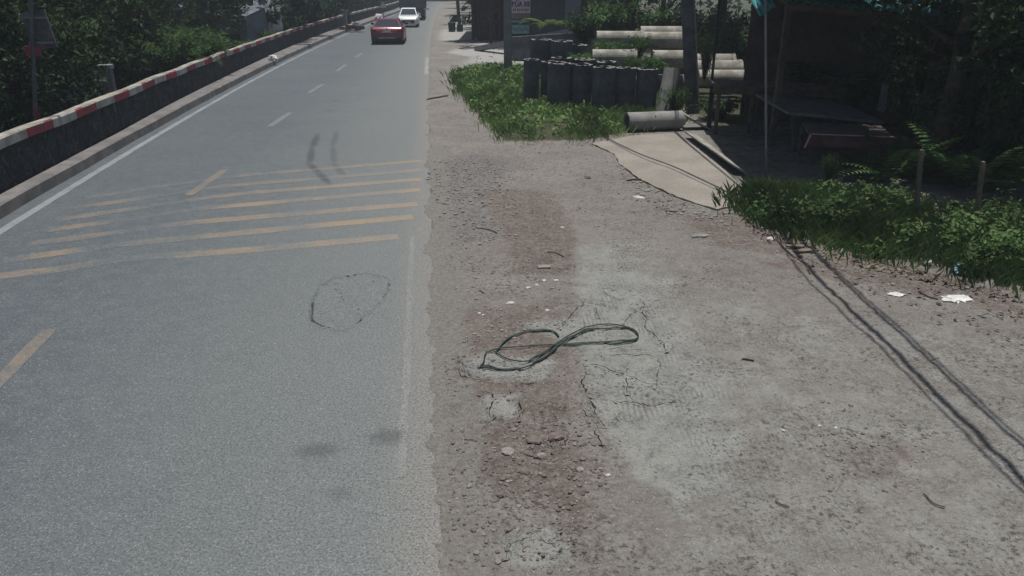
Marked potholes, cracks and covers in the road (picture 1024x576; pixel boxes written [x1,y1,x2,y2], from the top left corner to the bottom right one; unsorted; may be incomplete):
crack [544,291,689,455]
